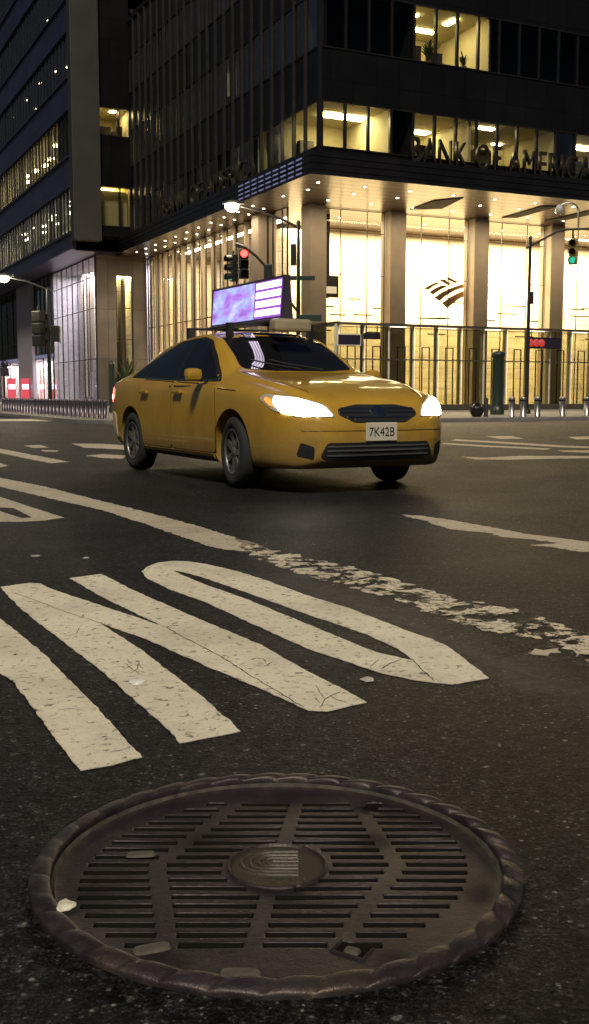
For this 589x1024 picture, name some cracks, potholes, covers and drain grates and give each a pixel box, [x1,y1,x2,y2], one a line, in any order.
crack [165,626,302,706]
manhole cover [28,773,524,1000]
